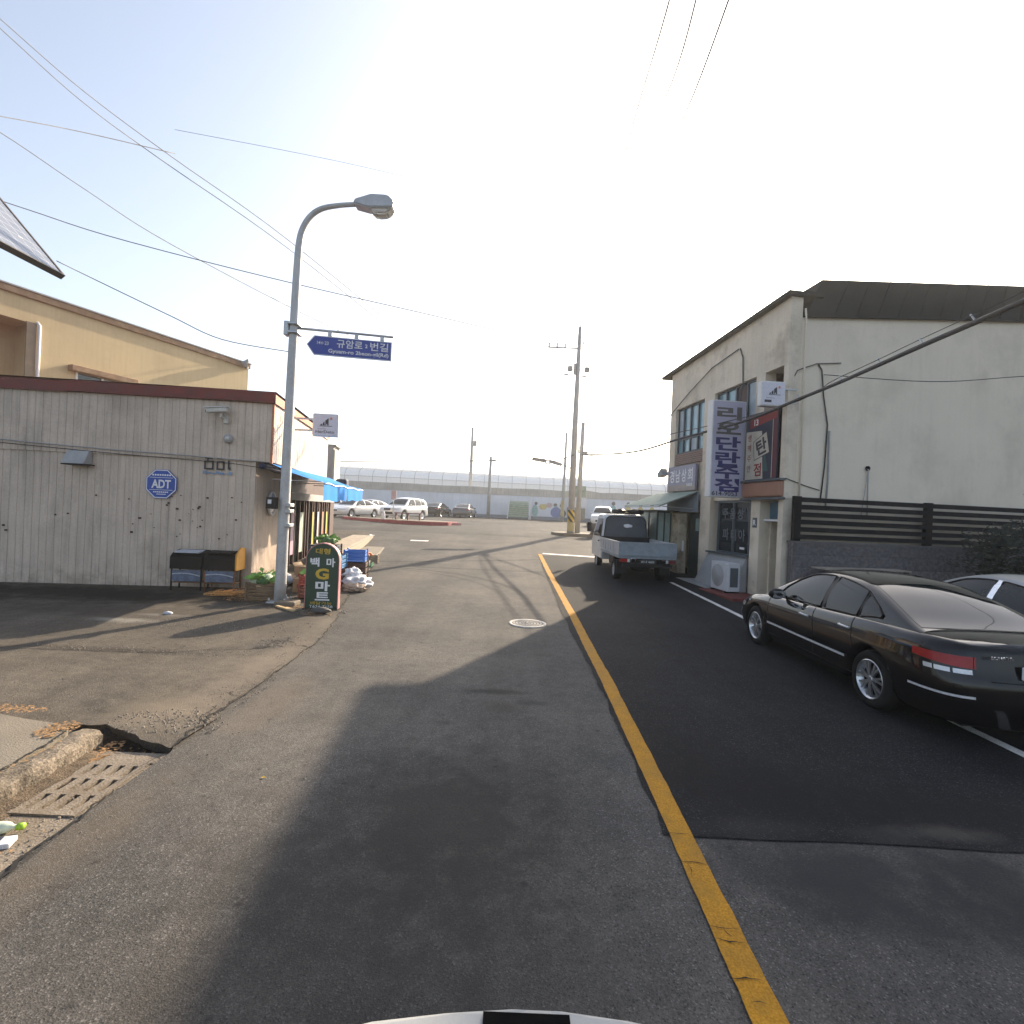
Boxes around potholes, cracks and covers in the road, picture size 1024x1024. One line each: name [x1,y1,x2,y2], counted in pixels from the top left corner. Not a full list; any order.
pothole [94,733,173,754]
manhole cover [509,619,546,628]
